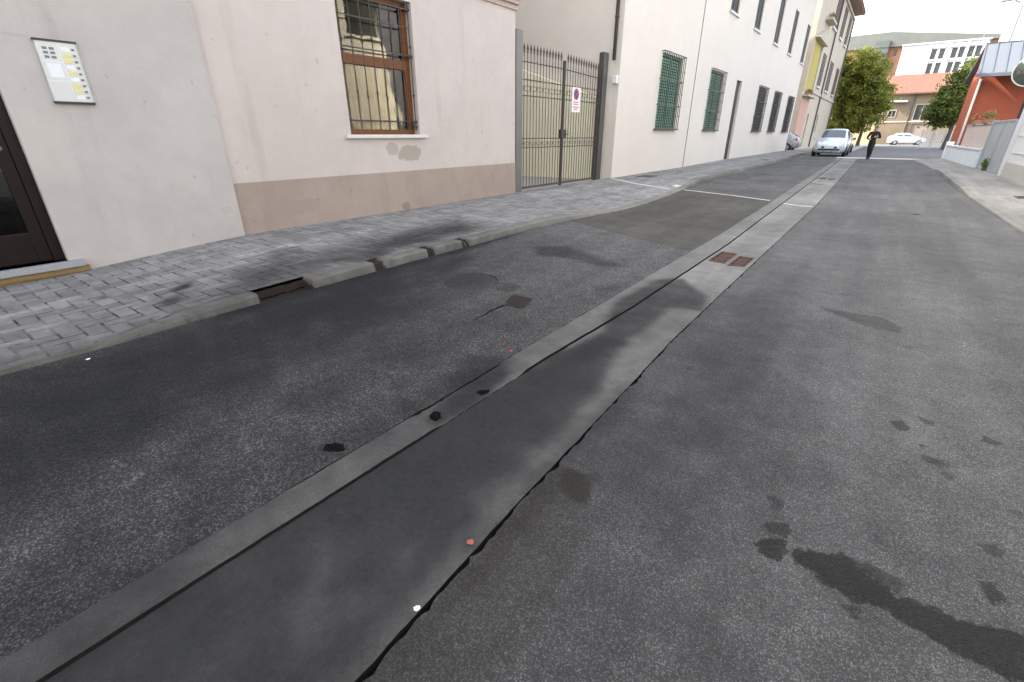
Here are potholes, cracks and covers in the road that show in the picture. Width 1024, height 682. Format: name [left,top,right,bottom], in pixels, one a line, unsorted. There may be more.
manhole cover [442,273,498,289]
pothole [323,442,345,452]
drain grate [708,251,737,264]
crack [35,160,856,682]
drain grate [727,256,755,267]
